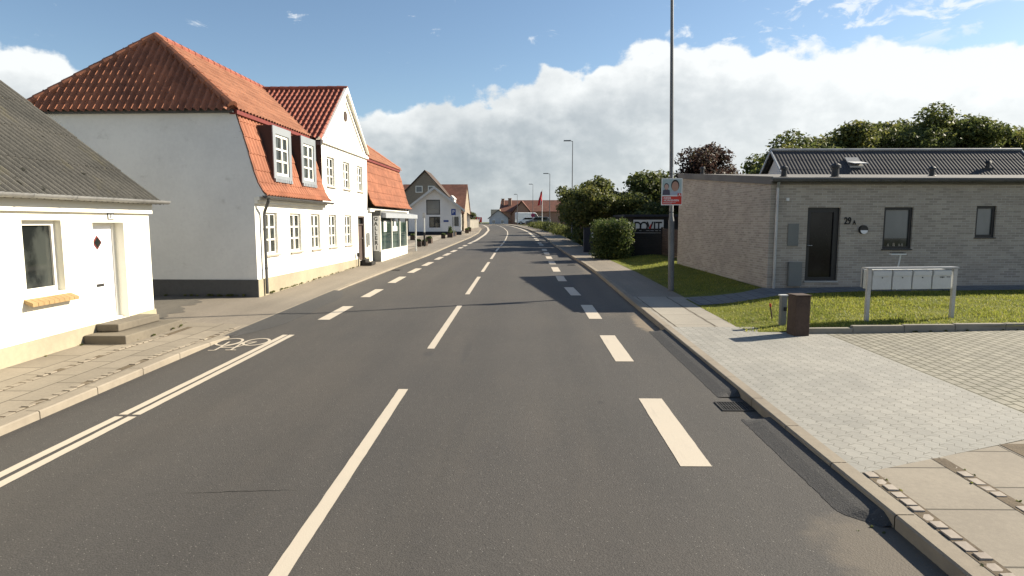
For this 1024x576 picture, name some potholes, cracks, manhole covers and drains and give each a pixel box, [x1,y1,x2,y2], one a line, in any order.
drain grate [714,401,756,411]
